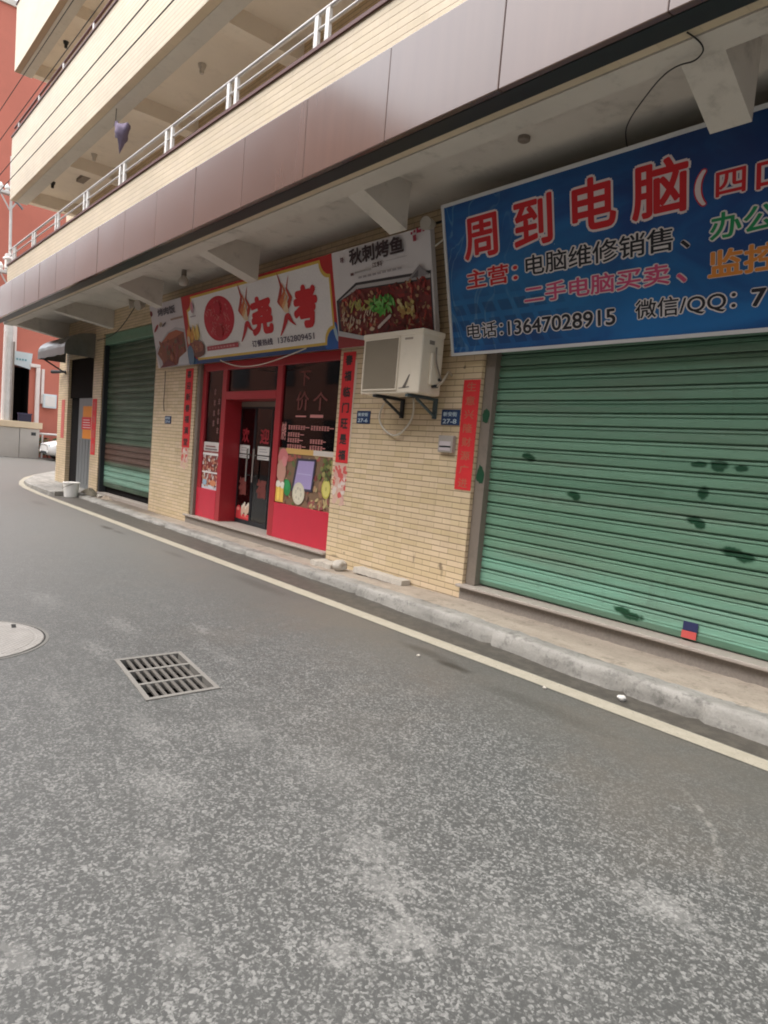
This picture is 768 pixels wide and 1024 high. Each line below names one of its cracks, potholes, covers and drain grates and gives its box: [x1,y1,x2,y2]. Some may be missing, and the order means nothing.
drain grate [114,651,220,701]
manhole cover [0,620,49,660]
